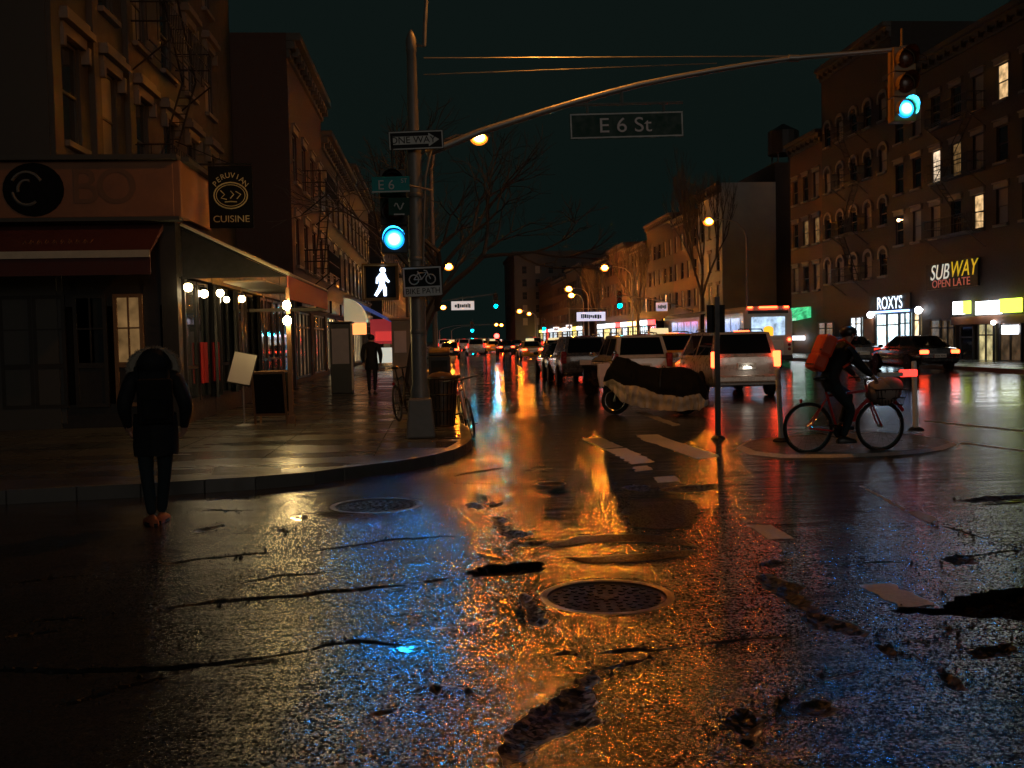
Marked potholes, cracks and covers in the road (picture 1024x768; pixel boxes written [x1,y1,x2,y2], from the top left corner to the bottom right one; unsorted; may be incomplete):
manhole cover [330,498,422,513]
pothole [489,516,533,544]
crack [0,617,411,706]
pothole [889,586,1024,621]
pothole [721,708,769,752]
pothole [518,593,549,628]
pothole [756,573,872,638]
manhole cover [540,580,674,614]
crack [310,536,456,552]
pothole [498,662,602,766]
pothole [465,561,546,578]
pothole [936,673,969,691]
